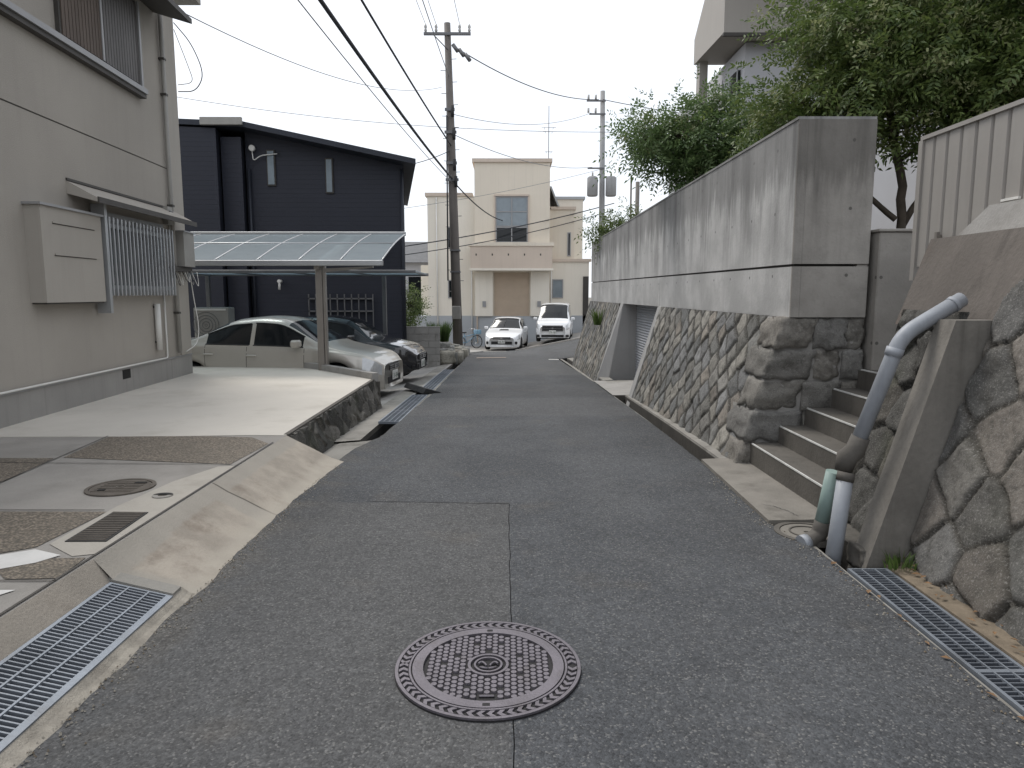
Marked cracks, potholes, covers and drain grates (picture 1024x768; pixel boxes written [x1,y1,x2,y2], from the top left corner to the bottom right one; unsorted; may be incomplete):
drain grate [847,568,1024,716]
manhole cover [774,522,828,548]
drain grate [423,369,454,390]
manhole cover [394,621,581,723]
drain grate [65,512,148,542]
manhole cover [84,478,157,497]
drain grate [0,582,173,754]
drain grate [378,395,427,424]
